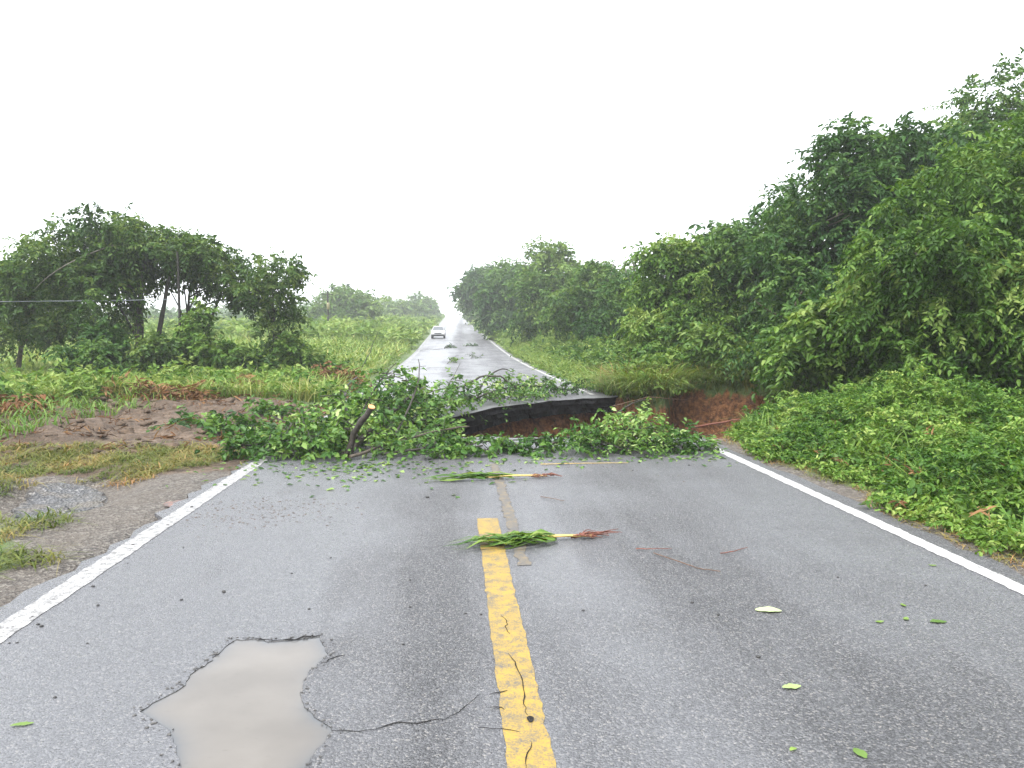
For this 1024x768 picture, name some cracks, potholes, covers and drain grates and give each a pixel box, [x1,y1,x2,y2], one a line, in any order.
pothole [140,636,332,768]
crack [331,653,532,764]
